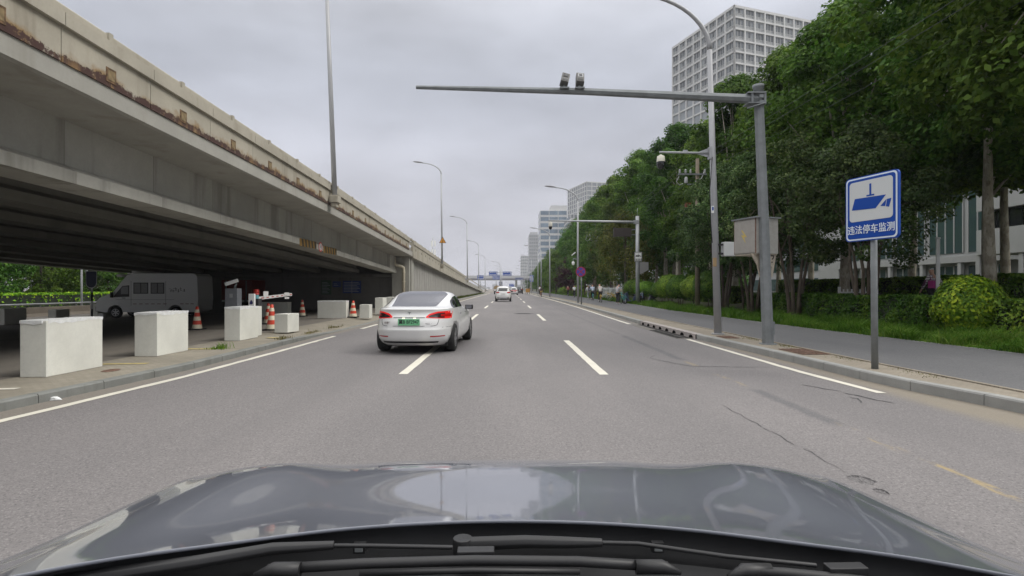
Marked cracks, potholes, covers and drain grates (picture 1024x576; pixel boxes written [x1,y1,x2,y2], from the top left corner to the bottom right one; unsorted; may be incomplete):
pothole [847,475,876,485]
